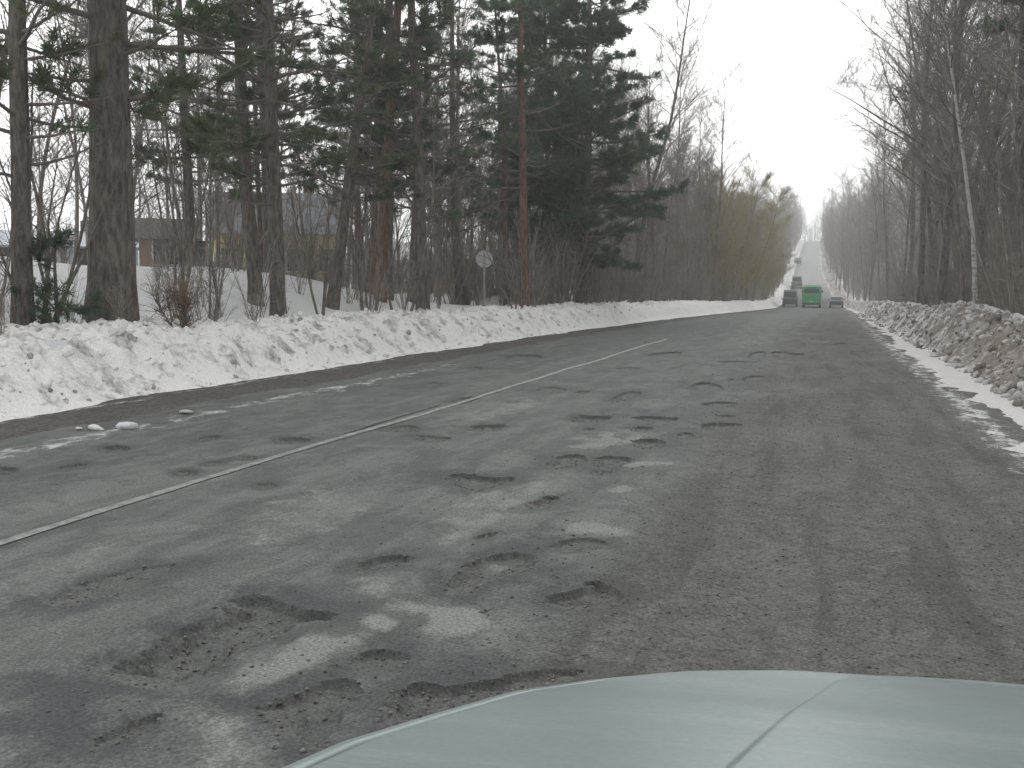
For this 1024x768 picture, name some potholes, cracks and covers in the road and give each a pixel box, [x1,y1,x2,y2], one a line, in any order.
pothole [348,554,414,575]
pothole [103,594,340,690]
pothole [592,456,634,474]
pothole [524,496,560,508]
pothole [371,669,588,729]
pothole [544,454,587,470]
pothole [543,581,626,611]
pothole [442,473,516,491]
pothole [443,552,541,598]
pothole [349,649,413,673]
pothole [546,537,610,552]
pothole [632,439,667,449]
